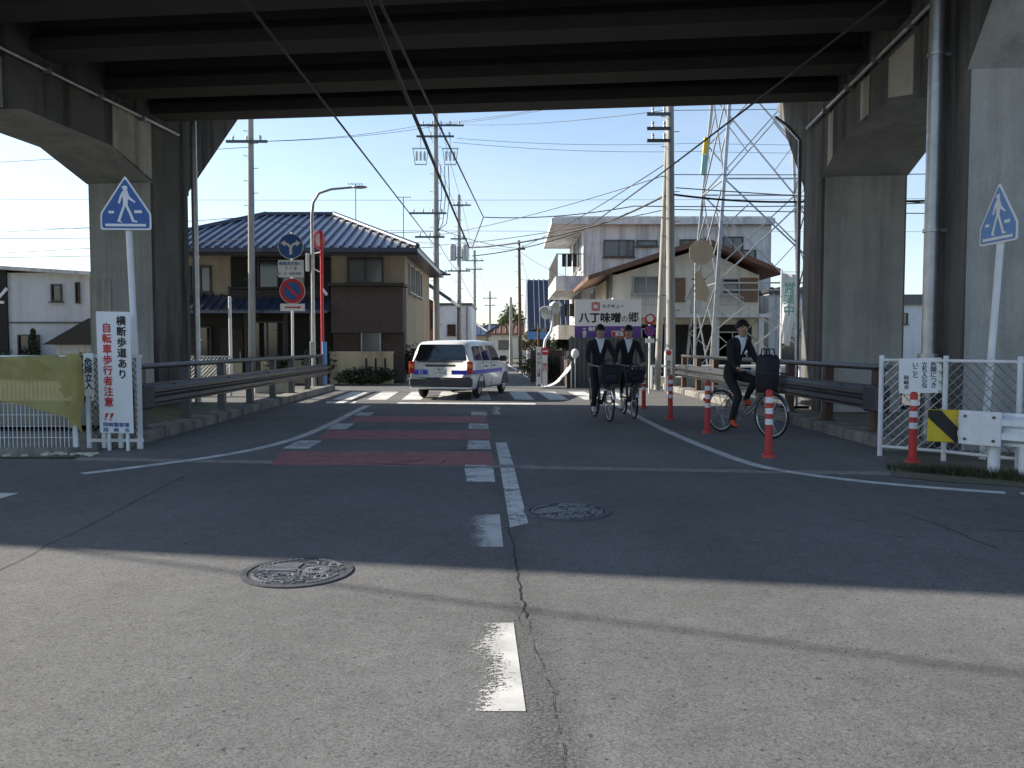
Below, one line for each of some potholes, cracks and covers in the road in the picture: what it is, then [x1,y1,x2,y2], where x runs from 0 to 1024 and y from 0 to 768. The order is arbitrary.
manhole cover [239,556,353,588]
crack [897,512,1024,548]
crack [0,473,189,570]
crack [507,527,565,768]
manhole cover [523,502,610,521]
